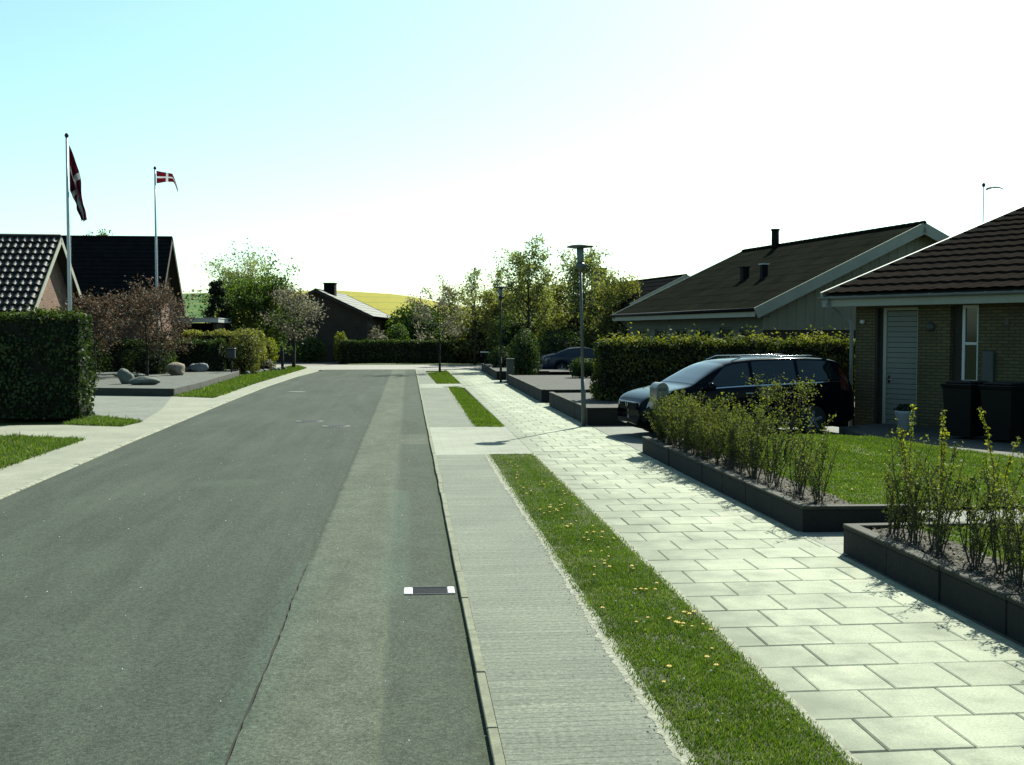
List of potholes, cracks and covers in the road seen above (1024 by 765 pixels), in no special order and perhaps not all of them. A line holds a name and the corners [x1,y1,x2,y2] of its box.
drain grate [404,586,455,595]
